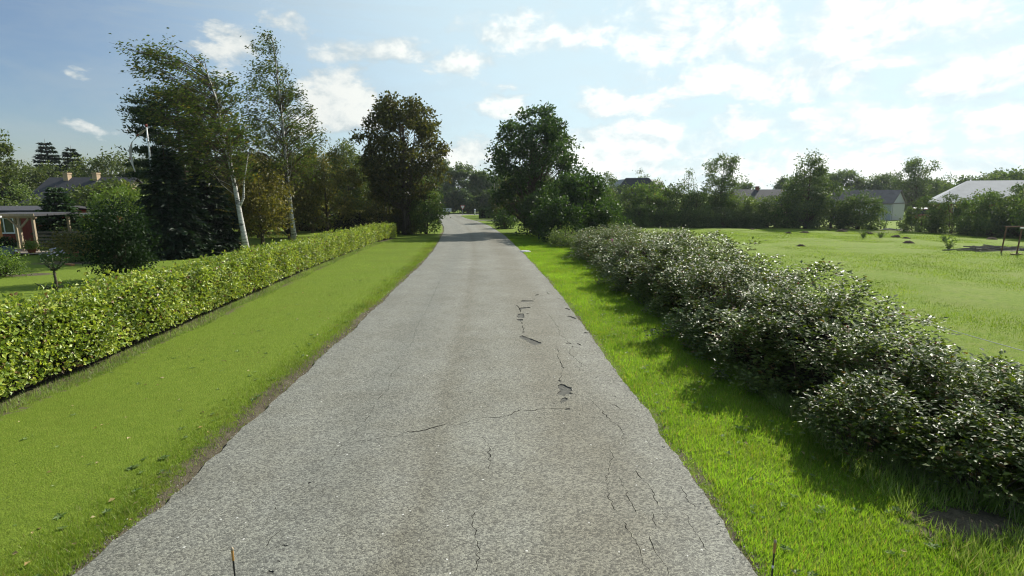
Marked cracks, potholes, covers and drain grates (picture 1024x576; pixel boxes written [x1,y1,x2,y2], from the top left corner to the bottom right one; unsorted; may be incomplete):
crack [356,314,669,573]
pothole [557,384,573,396]
